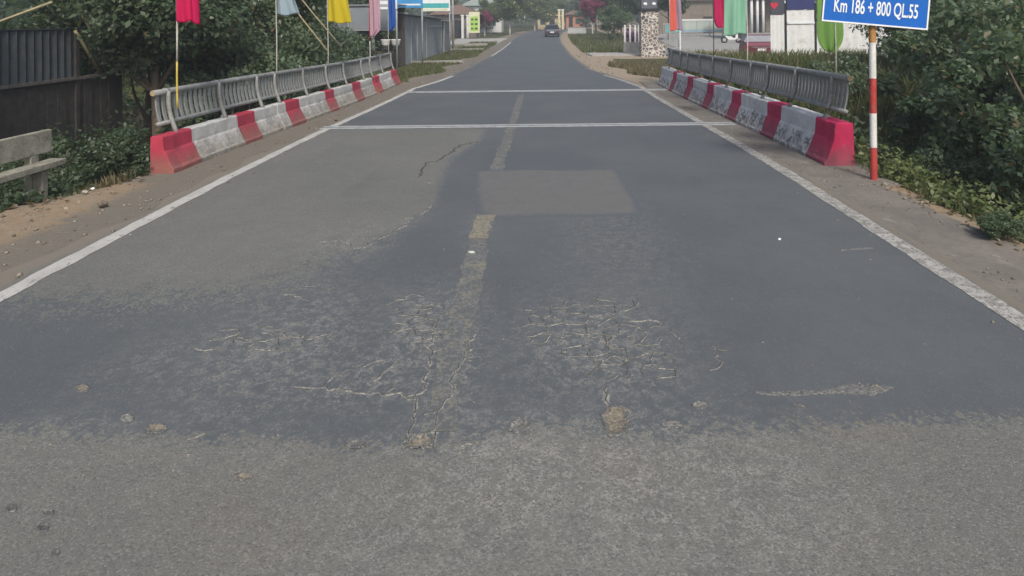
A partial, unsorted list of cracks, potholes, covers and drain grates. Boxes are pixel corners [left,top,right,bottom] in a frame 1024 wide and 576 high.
crack [322,204,432,249]
pothole [146,423,168,434]
crack [521,298,683,411]
pothole [507,417,532,434]
pothole [599,404,632,437]
crack [416,141,478,186]
crack [192,326,334,351]
crack [294,294,480,449]
crack [283,283,322,302]
pothole [406,432,432,449]
pothole [234,473,253,482]
